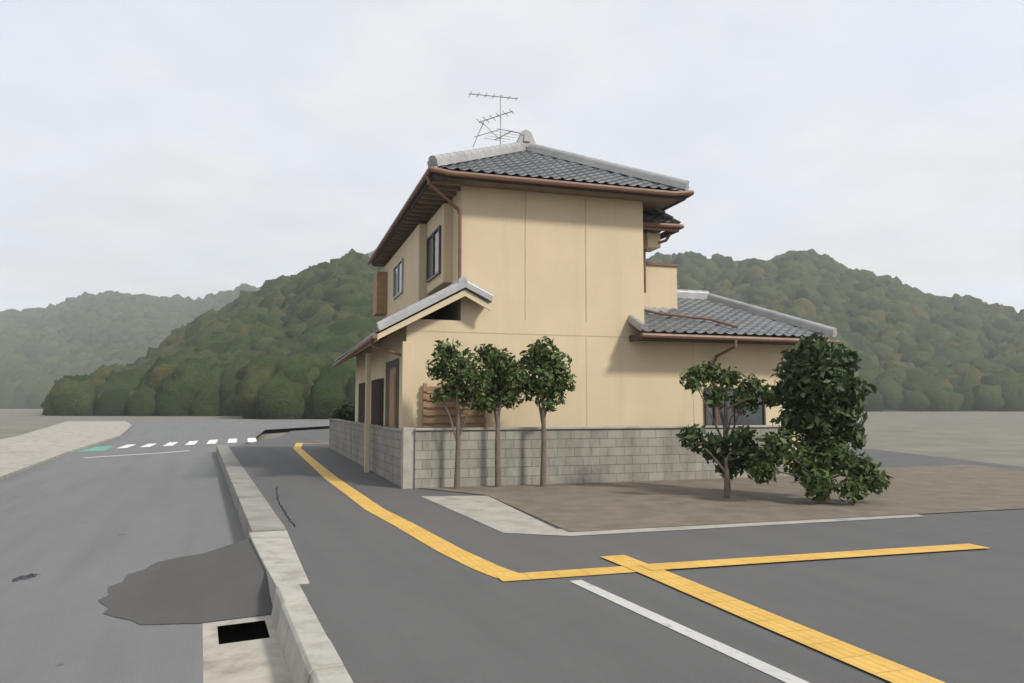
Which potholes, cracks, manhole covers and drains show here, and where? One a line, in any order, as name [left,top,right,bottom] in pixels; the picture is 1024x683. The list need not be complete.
crack [276,486,296,528]
